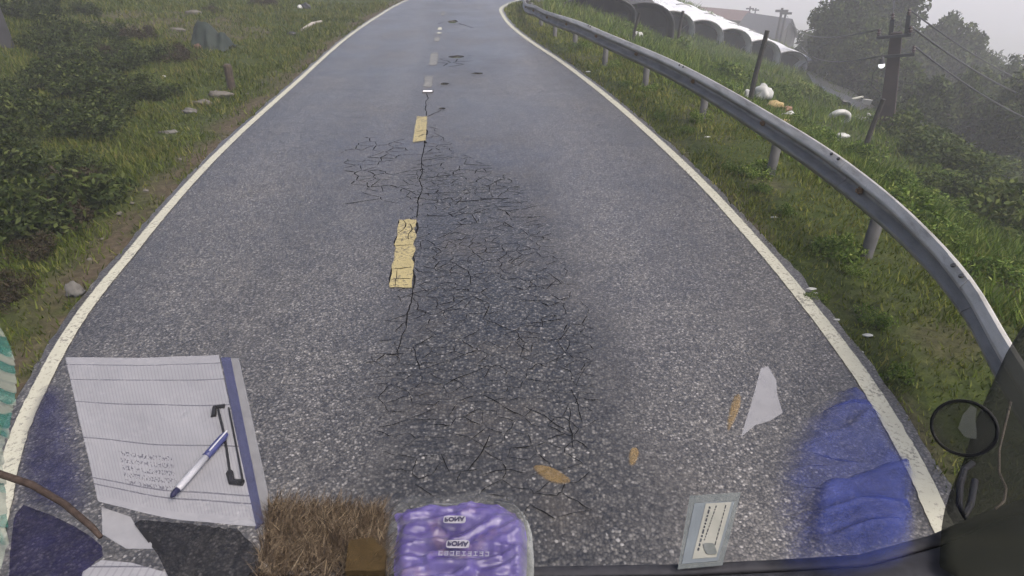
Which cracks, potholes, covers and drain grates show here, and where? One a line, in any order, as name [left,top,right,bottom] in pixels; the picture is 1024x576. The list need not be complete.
crack [341,93,598,519]
